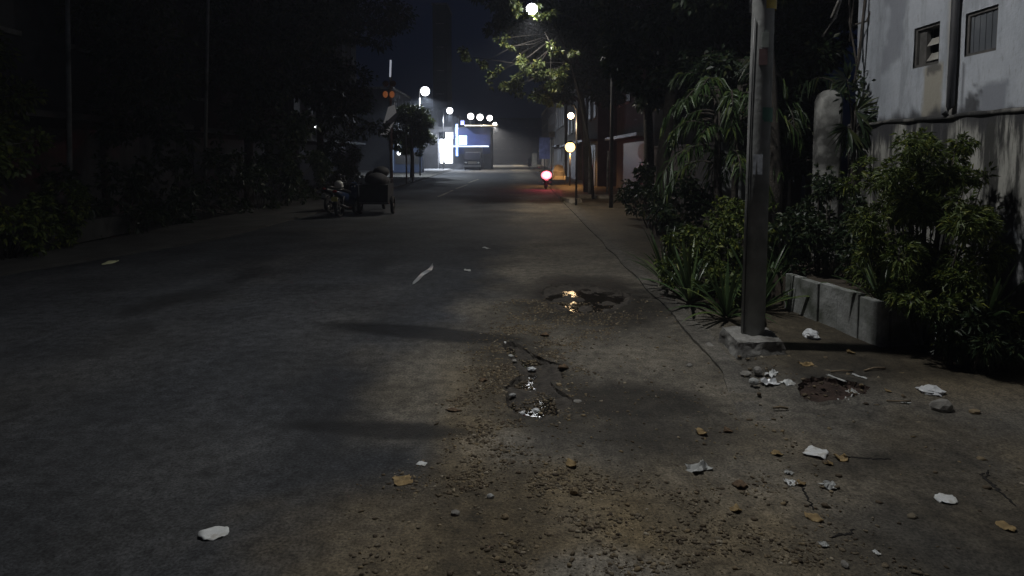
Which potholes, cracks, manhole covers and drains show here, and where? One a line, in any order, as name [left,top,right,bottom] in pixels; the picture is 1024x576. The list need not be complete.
pothole [493,339,585,423]
crack [802,487,814,510]
crack [979,470,1016,506]
pothole [785,373,882,410]
pothole [533,282,640,315]
